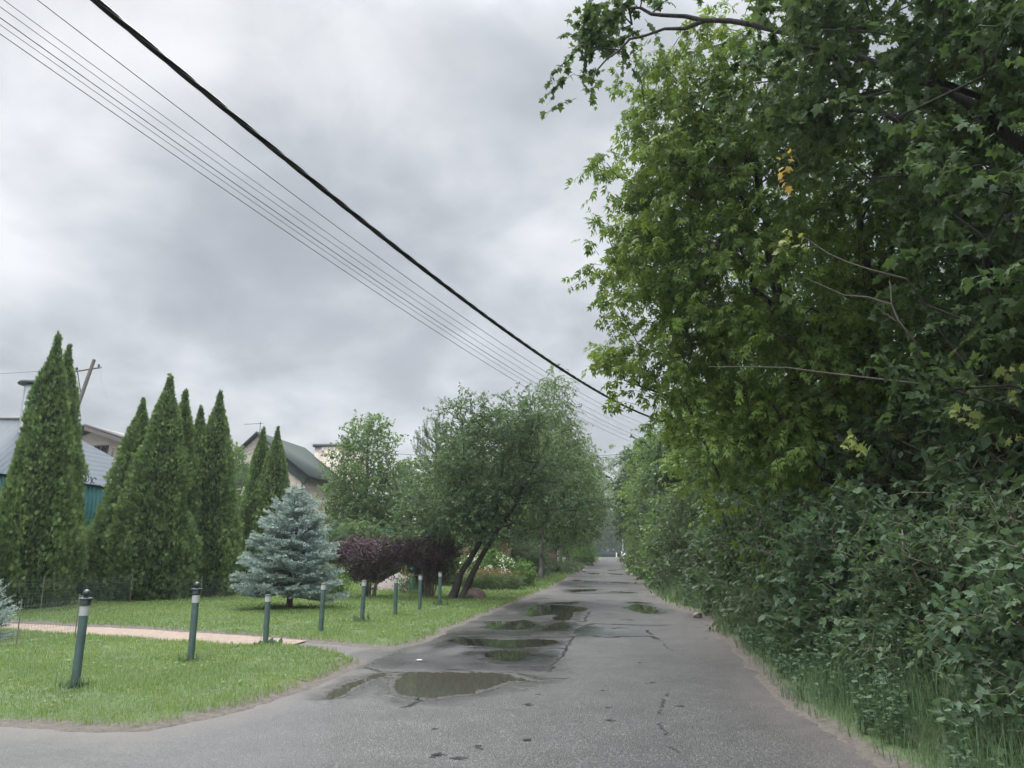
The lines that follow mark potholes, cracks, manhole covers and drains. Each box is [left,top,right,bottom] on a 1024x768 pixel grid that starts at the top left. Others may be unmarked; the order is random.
pothole [522,604,589,621]
crack [657,693,680,753]
pothole [387,671,544,700]
pothole [622,604,662,614]
crack [363,611,673,679]
crack [403,699,424,708]
pothole [319,672,393,700]
